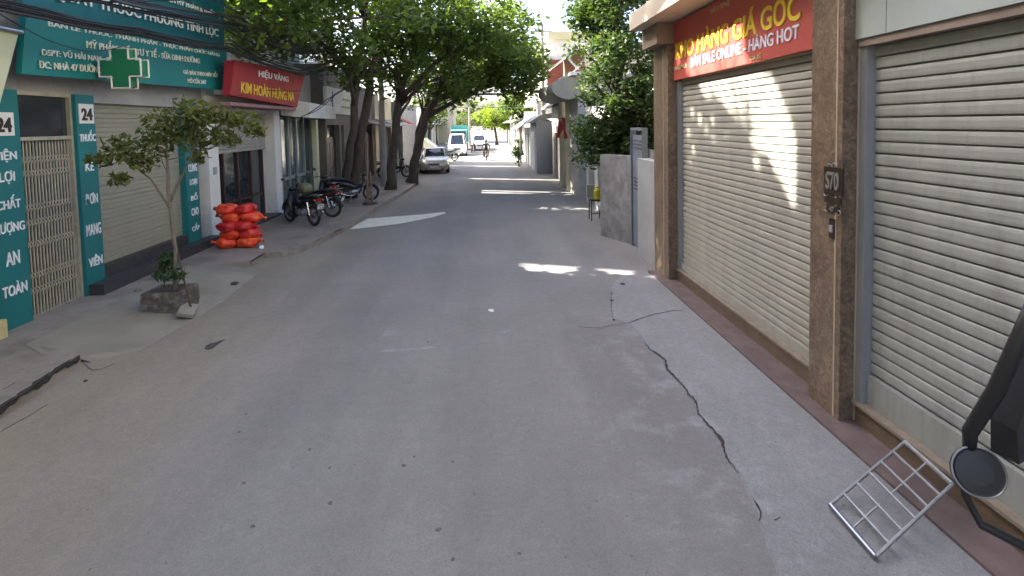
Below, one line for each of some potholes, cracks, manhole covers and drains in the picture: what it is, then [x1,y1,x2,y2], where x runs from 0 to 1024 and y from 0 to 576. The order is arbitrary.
crack [645,343,738,472]
